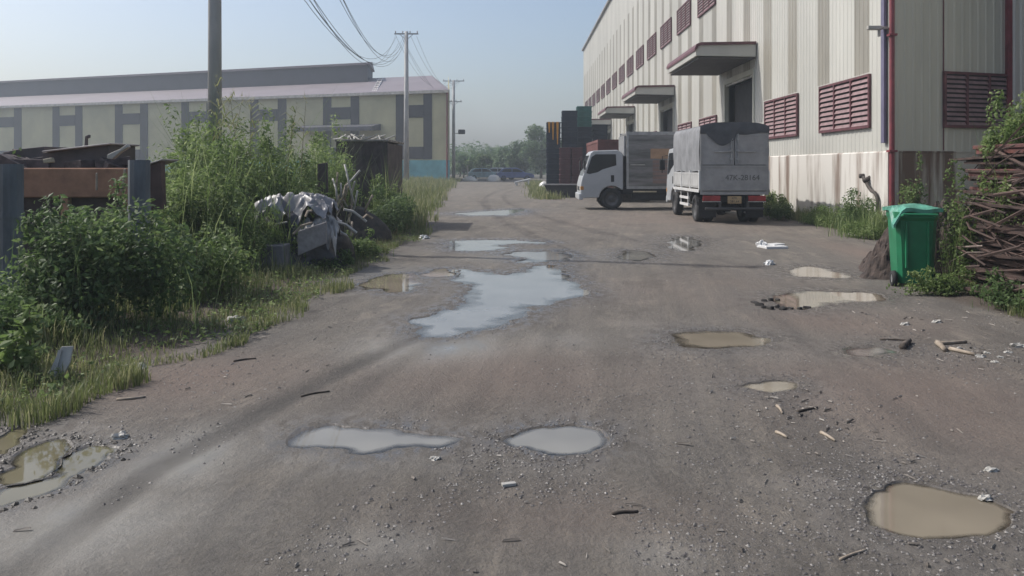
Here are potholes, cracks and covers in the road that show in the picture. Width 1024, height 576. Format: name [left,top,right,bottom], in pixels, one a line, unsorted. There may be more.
pothole [750,290,888,310]
pothole [861,480,1017,539]
pothole [788,266,854,278]
pothole [445,239,547,251]
pothole [357,272,425,293]
pothole [737,380,799,393]
pothole [666,329,773,350]
pothole [614,250,659,261]
pothole [665,236,704,251]
pothole [0,444,120,507]
pothole [842,345,900,357]
